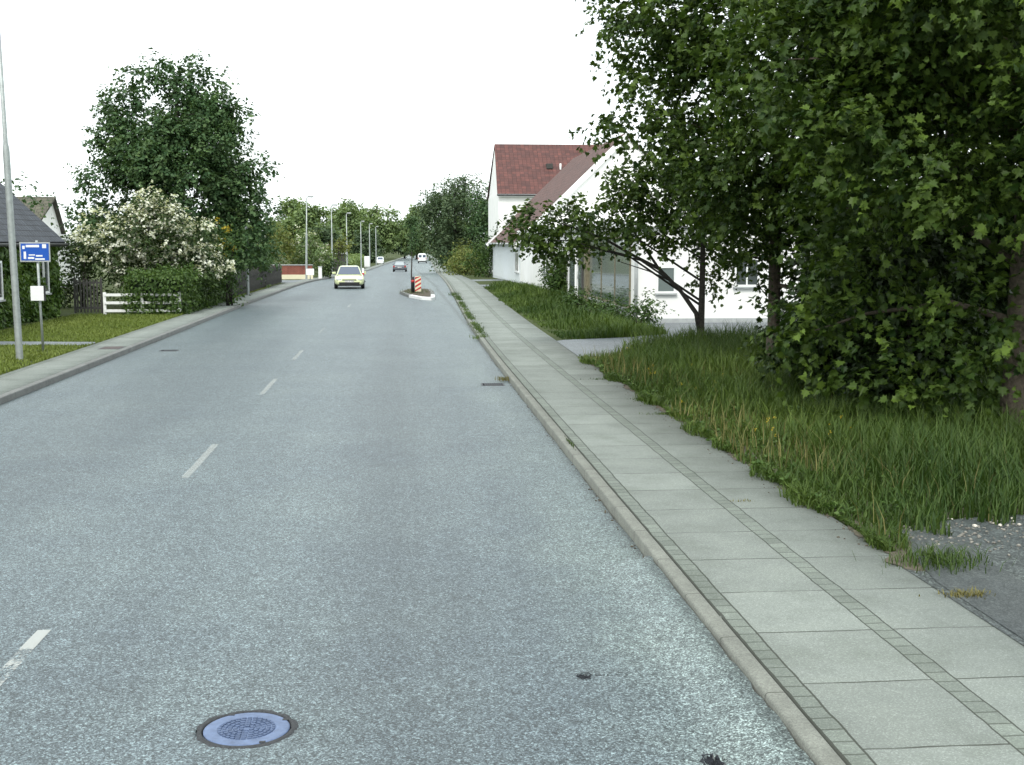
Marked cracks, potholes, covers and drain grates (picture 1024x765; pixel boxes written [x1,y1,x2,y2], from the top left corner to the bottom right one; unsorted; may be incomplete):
pothole [700,753,728,765]
manhole cover [196,709,299,749]
